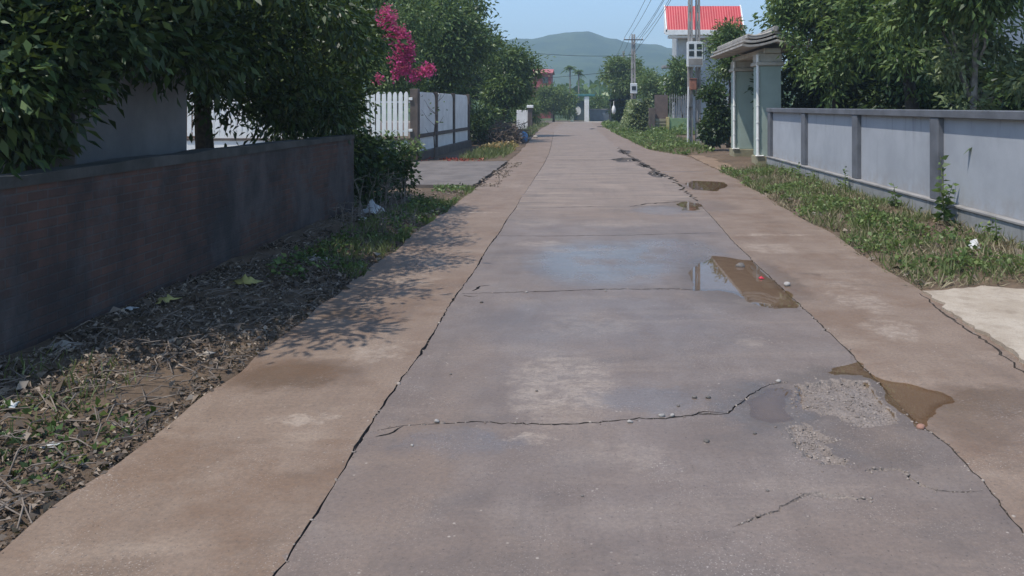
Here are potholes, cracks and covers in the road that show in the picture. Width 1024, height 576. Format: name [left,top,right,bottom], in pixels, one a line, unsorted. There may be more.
crack [617,147,698,207]
pothole [773,374,917,436]
crack [375,382,787,437]
crack [732,466,978,528]
